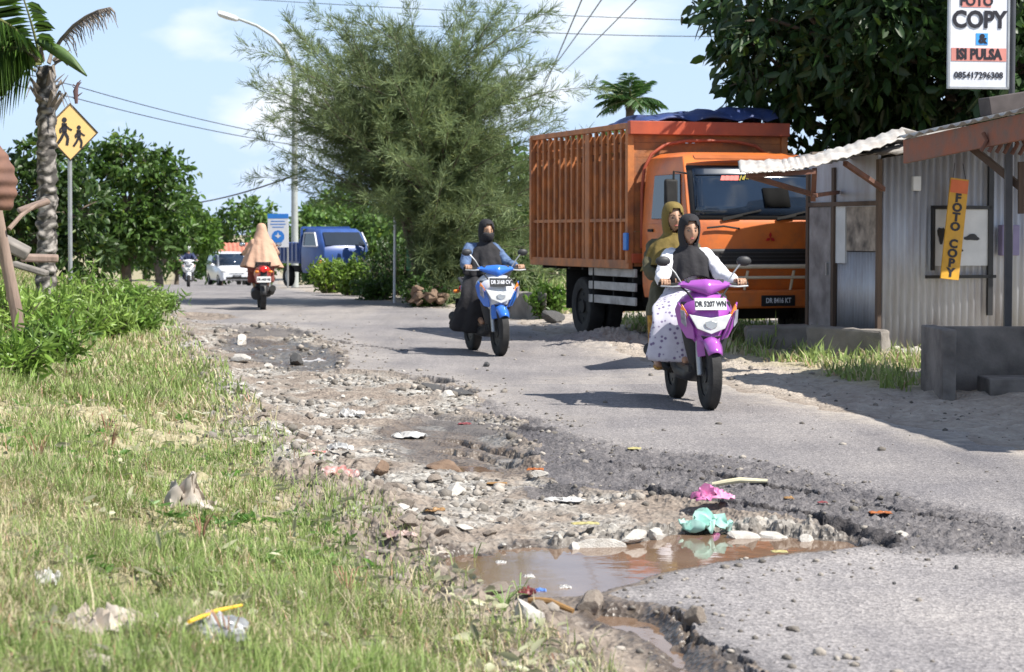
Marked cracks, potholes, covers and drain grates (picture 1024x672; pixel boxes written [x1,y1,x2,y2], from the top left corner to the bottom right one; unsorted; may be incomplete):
pothole [428,519,873,581]
pothole [223,325,317,338]
pothole [823,513,904,548]
pothole [524,482,583,502]
pothole [378,412,536,475]
pothole [579,597,739,672]
pothole [218,335,343,372]
